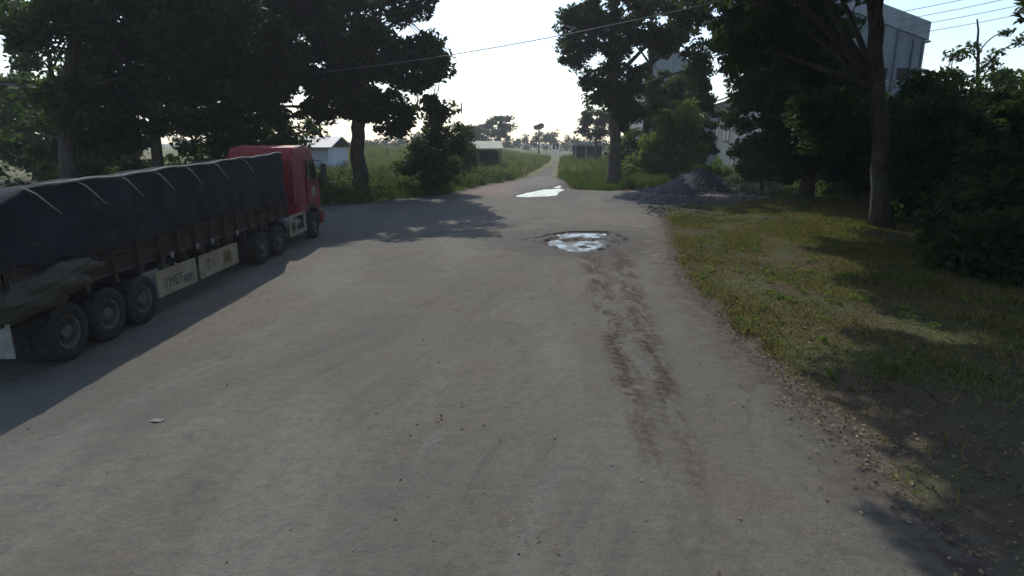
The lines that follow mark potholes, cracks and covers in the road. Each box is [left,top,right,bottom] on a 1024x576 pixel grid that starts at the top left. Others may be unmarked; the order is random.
pothole [521,231,630,252]
pothole [512,183,569,197]
